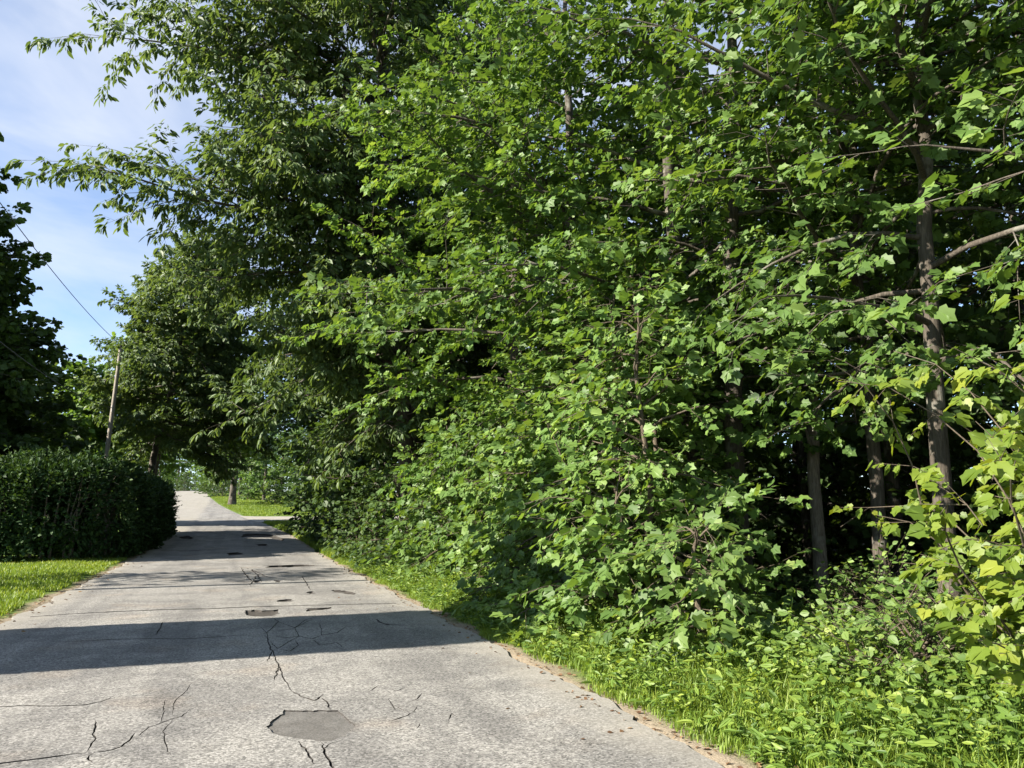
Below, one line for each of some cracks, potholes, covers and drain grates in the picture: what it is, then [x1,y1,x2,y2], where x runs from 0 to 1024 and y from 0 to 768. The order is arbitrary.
crack [262,618,344,708]
pothole [244,609,280,617]
crack [241,567,276,587]
crack [299,742,335,768]
crack [0,686,190,764]
crack [360,686,454,737]
